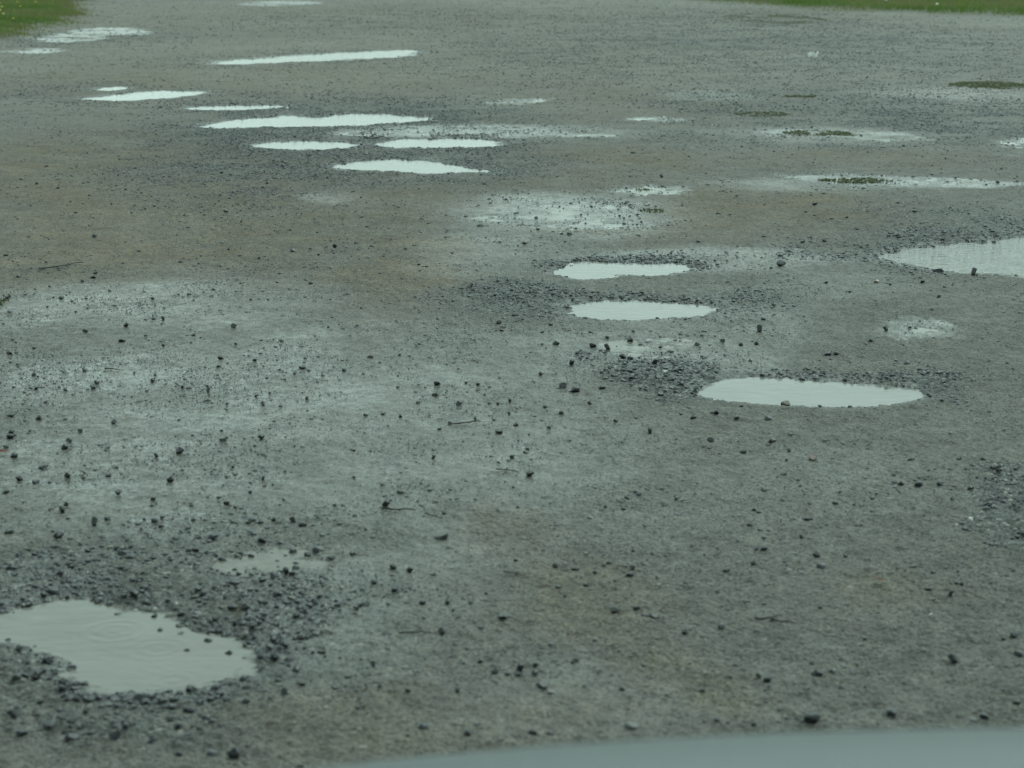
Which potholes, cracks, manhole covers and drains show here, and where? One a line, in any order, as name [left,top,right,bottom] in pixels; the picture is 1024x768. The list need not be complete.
pothole [536,257,709,280]
